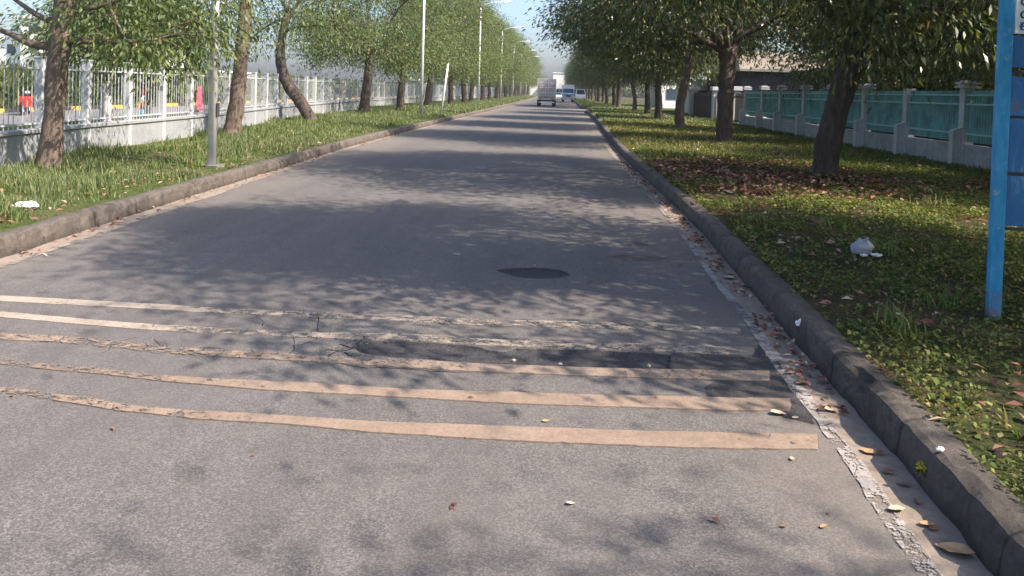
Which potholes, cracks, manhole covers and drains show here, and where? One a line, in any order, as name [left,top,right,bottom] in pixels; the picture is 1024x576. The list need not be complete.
crack [86,313,470,373]
pothole [351,341,671,370]
